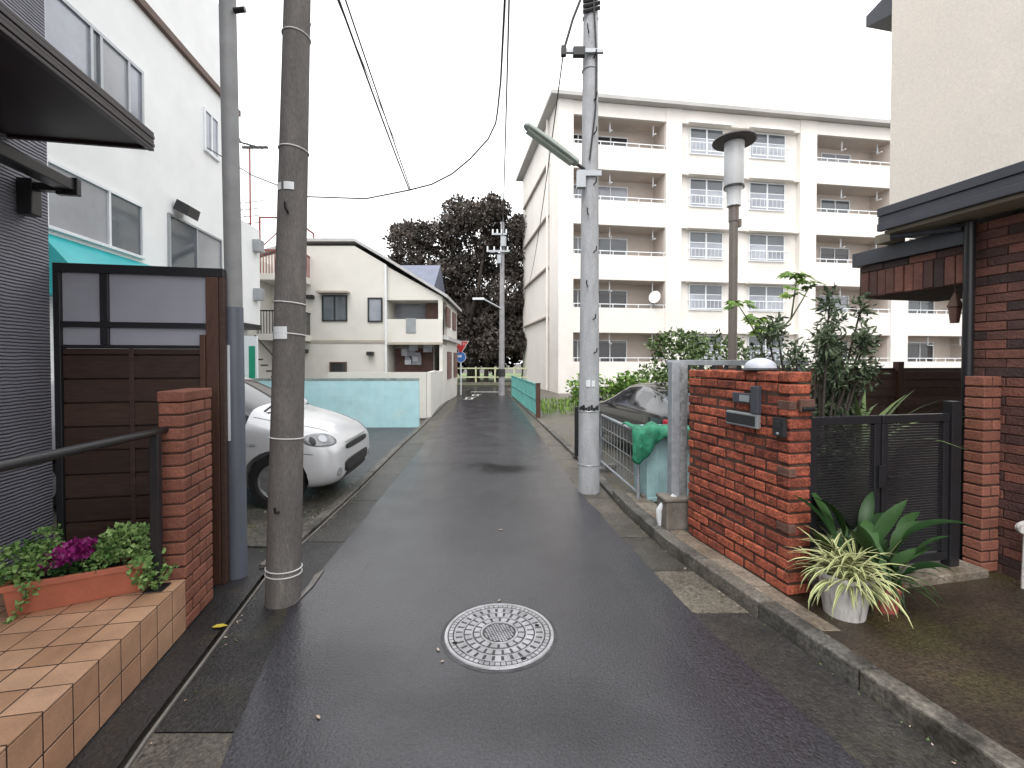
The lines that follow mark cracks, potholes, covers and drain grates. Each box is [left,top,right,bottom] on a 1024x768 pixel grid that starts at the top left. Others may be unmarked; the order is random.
manhole cover [440,603,558,673]
